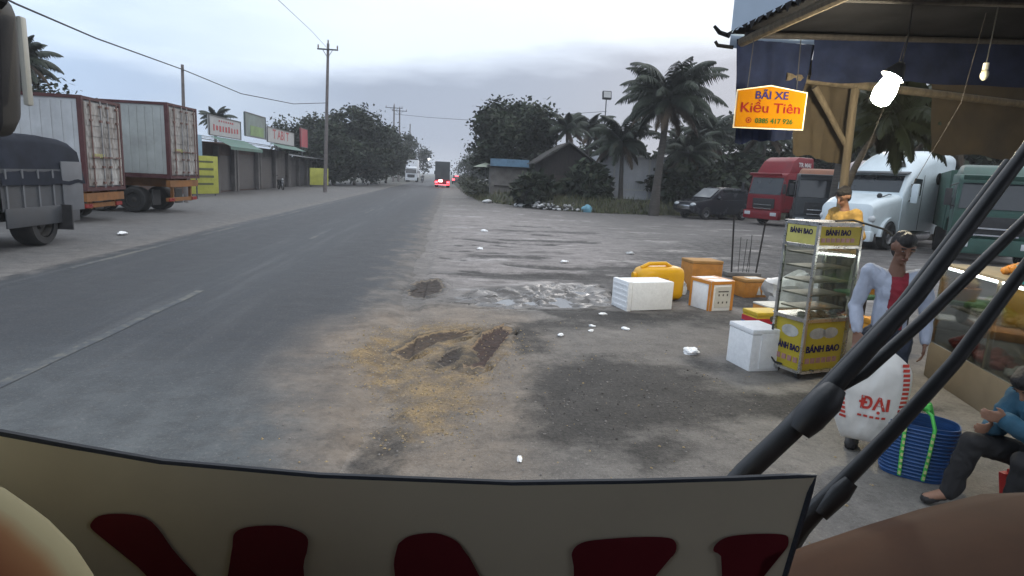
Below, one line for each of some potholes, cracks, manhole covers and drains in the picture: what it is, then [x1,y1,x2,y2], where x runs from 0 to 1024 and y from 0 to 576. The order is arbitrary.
pothole [456,321,518,375]
pothole [402,277,454,300]
pothole [426,344,480,372]
pothole [382,327,480,365]
pothole [447,282,616,312]
